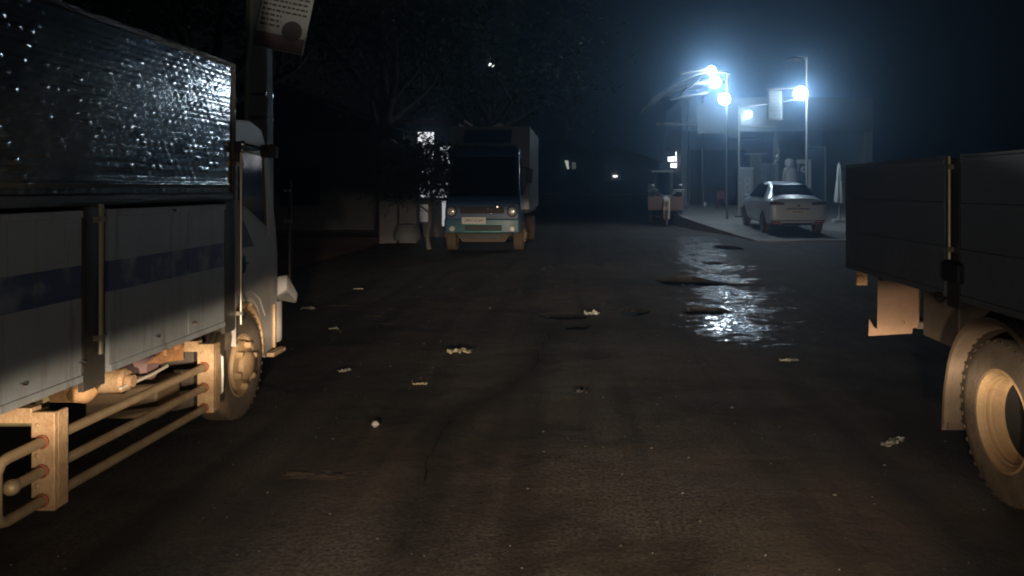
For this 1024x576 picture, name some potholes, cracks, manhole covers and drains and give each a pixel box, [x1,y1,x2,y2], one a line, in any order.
pothole [535,312,590,320]
pothole [560,321,591,330]
pothole [655,276,765,289]
pothole [681,306,736,315]
pothole [616,306,652,317]
